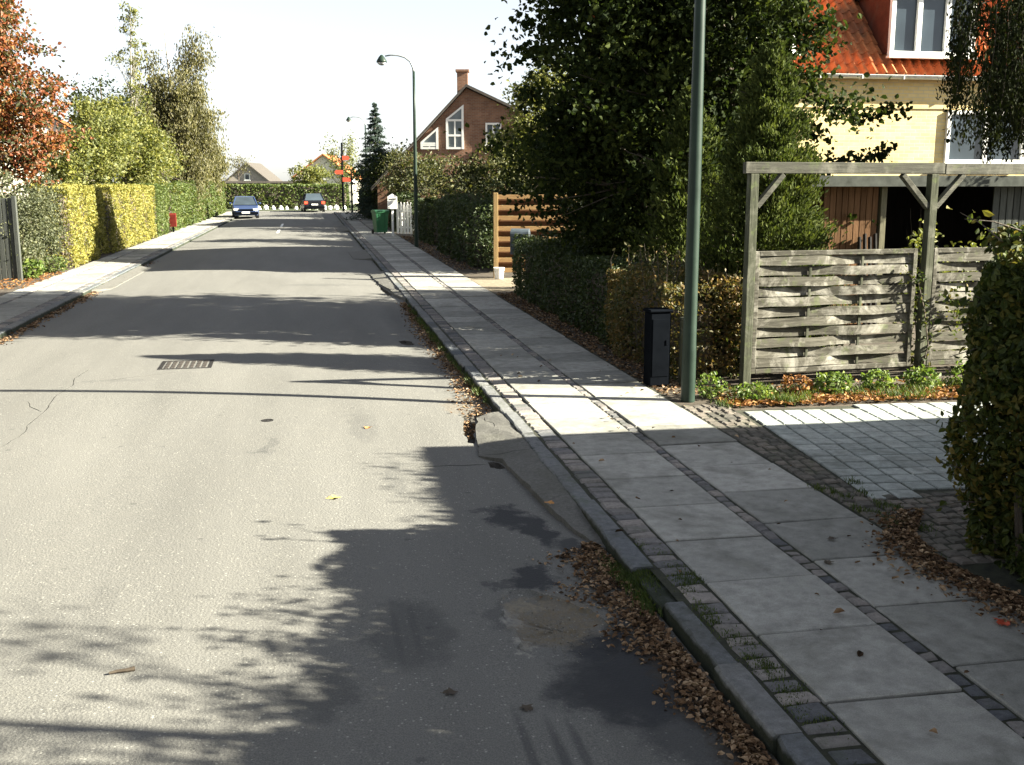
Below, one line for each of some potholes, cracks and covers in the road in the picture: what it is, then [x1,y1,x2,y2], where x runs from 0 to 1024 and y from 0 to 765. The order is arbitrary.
crack [1,370,88,447]
